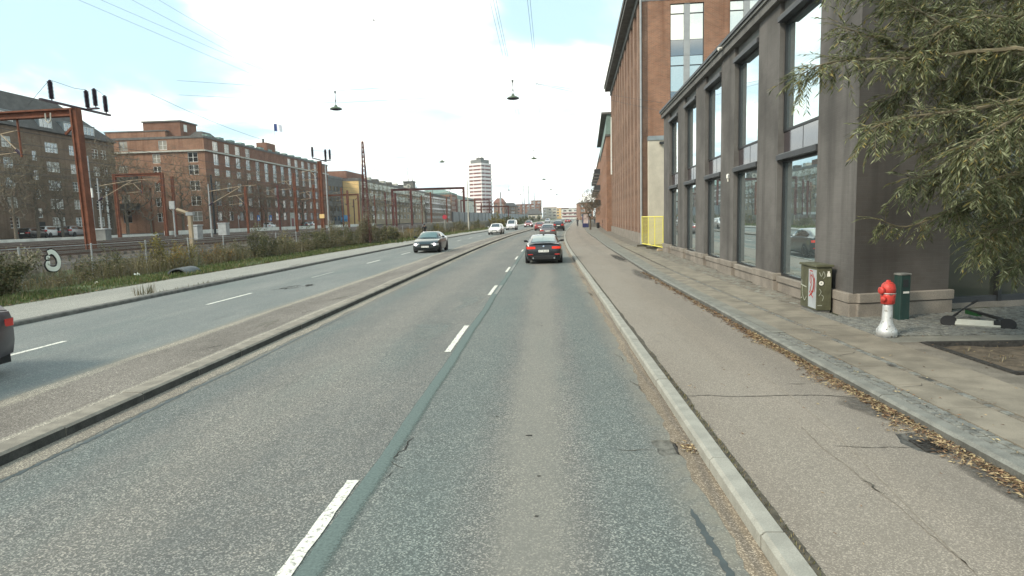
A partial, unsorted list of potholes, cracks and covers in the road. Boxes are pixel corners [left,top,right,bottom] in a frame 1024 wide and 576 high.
crack [802,427,976,572]
pothole [651,440,680,456]
pothole [896,432,954,455]
